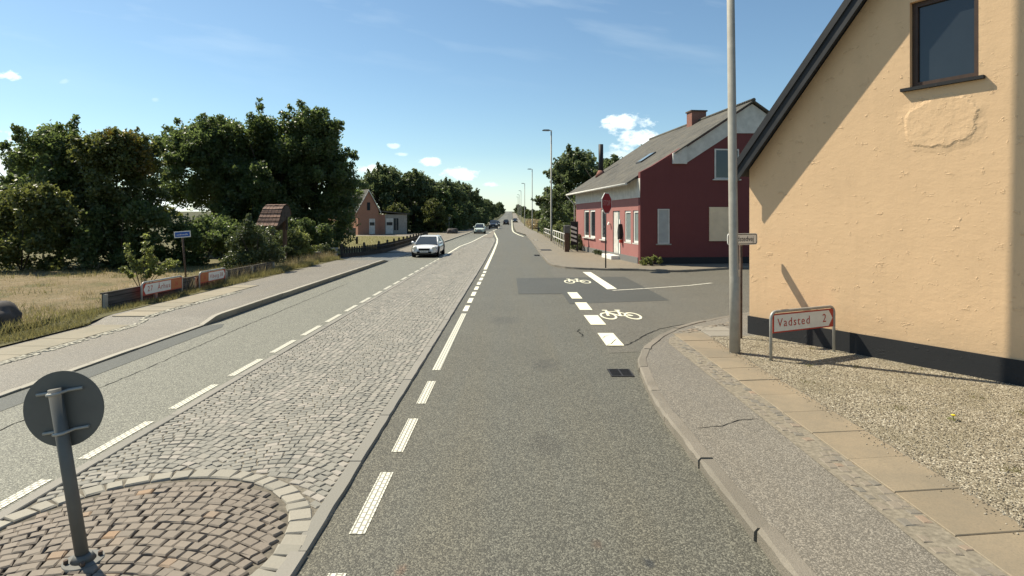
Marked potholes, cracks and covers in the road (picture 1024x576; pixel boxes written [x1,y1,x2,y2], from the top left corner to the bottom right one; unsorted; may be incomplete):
drain grate [607,369,635,377]
crack [603,324,684,346]
